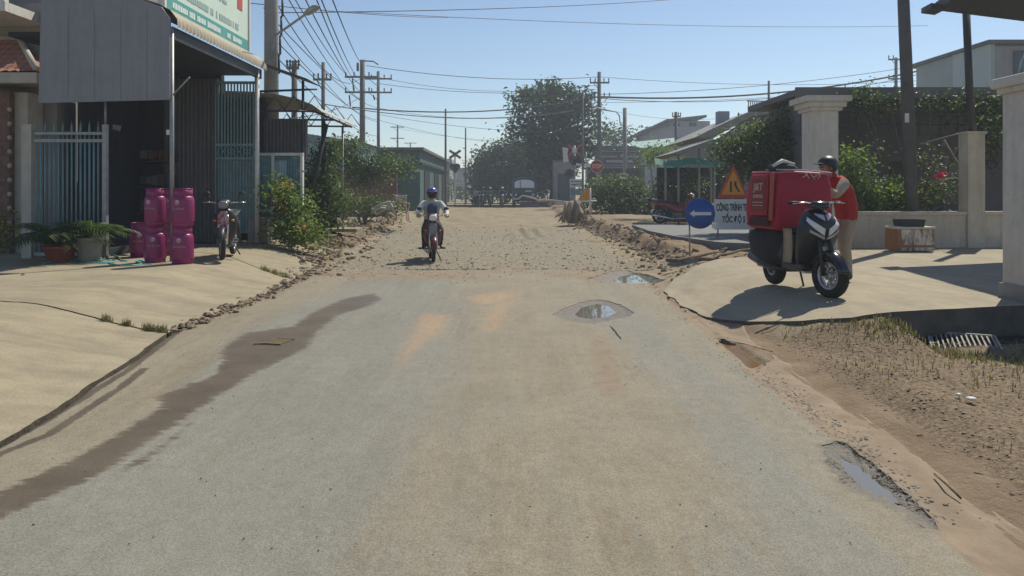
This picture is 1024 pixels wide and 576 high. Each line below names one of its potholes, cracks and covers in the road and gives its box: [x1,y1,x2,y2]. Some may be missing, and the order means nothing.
pothole [822,442,938,530]
pothole [587,270,665,284]
drain grate [928,332,1003,349]
pothole [553,300,634,324]
pothole [714,338,777,370]
